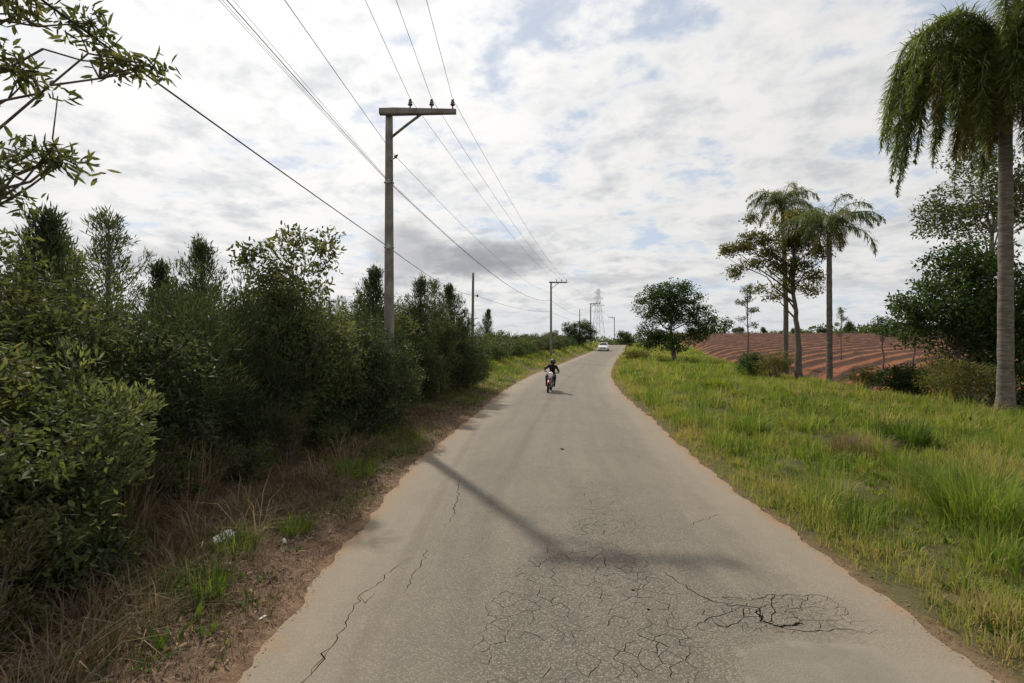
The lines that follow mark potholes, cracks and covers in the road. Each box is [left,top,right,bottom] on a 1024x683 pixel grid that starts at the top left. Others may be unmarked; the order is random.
crack [302,551,428,683]
crack [666,573,876,634]
